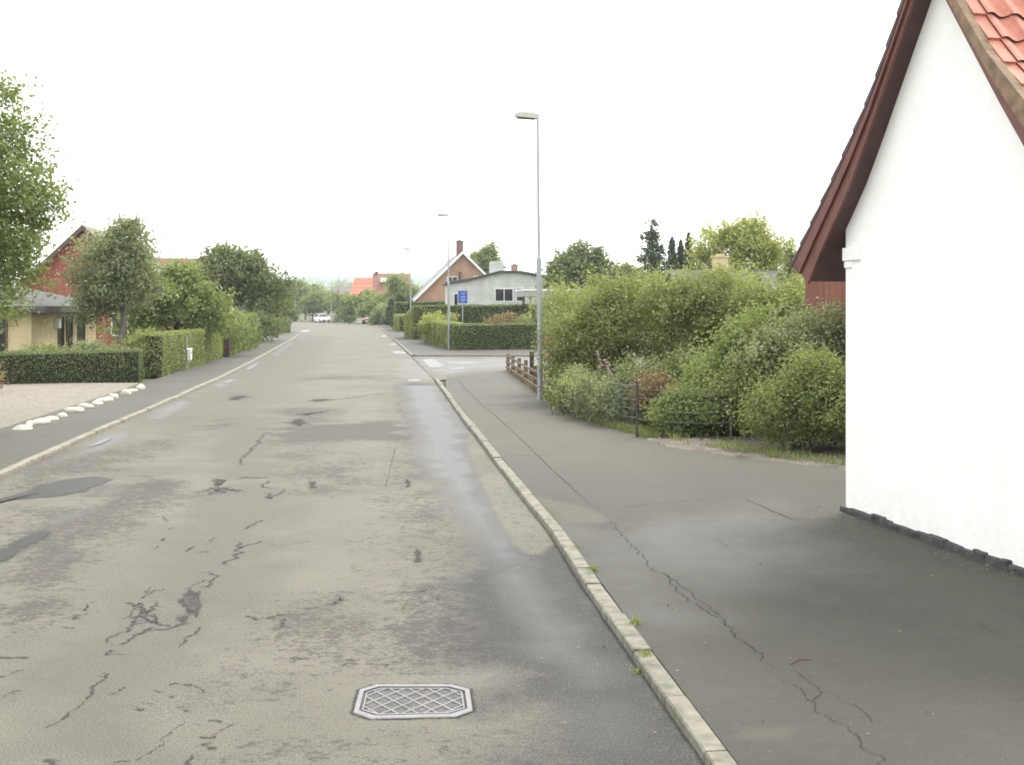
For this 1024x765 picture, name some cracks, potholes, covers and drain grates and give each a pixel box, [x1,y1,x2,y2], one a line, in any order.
manhole cover [350,683,476,720]
pothole [180,589,201,616]
crack [106,586,200,655]
crack [610,522,886,761]
crack [46,673,205,728]
crack [186,520,308,589]
crack [113,720,233,764]
crack [237,432,284,499]
